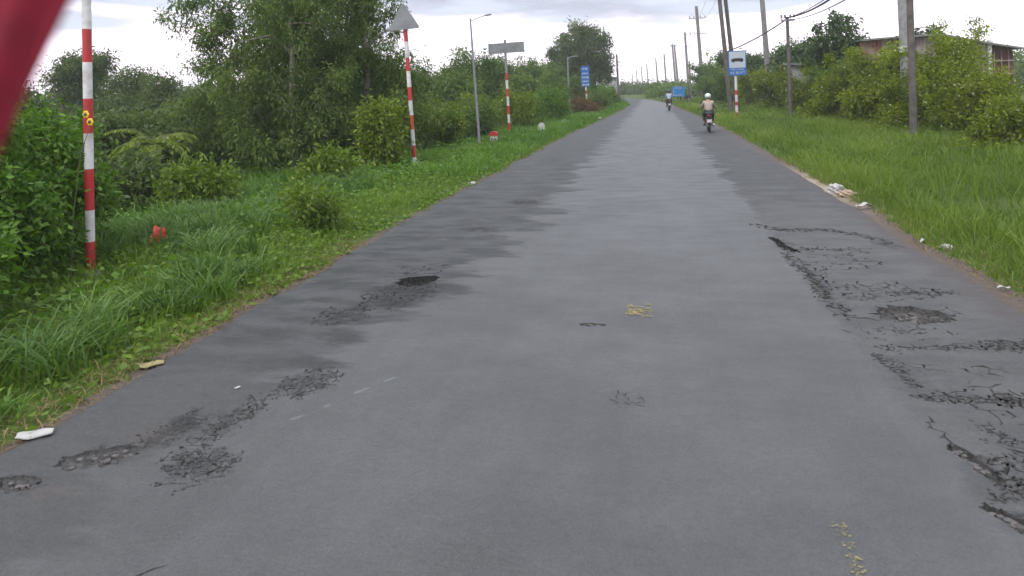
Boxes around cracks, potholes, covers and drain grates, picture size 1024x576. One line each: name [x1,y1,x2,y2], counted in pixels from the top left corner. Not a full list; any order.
pothole [868,305,957,325]
pothole [0,475,42,494]
crack [748,223,1024,504]
pothole [396,275,440,293]
pothole [53,442,144,472]
